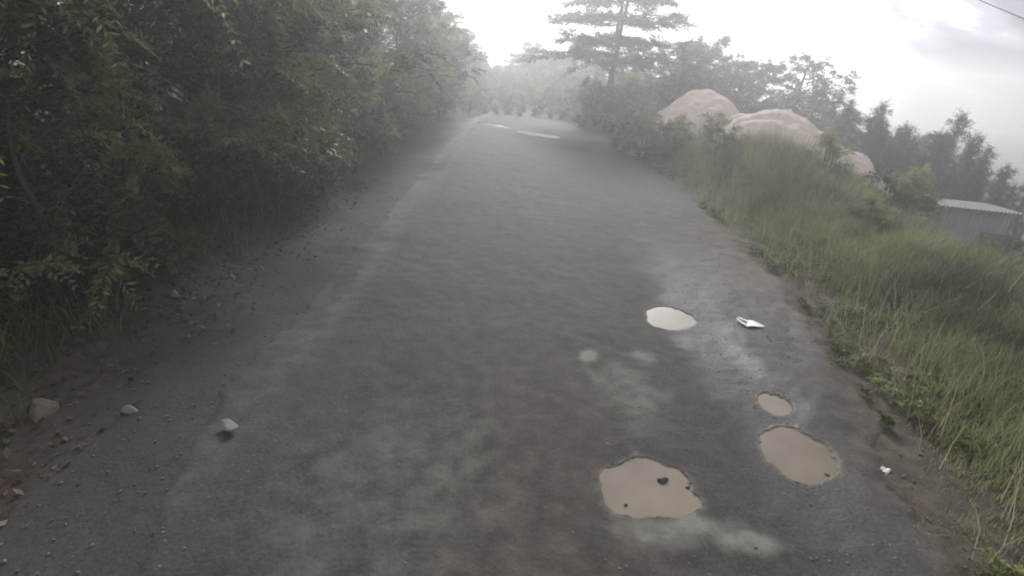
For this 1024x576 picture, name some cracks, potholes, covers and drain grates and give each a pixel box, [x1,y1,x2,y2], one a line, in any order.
pothole [756,392,794,416]
pothole [599,455,702,519]
pothole [646,306,699,330]
pothole [758,425,849,485]
